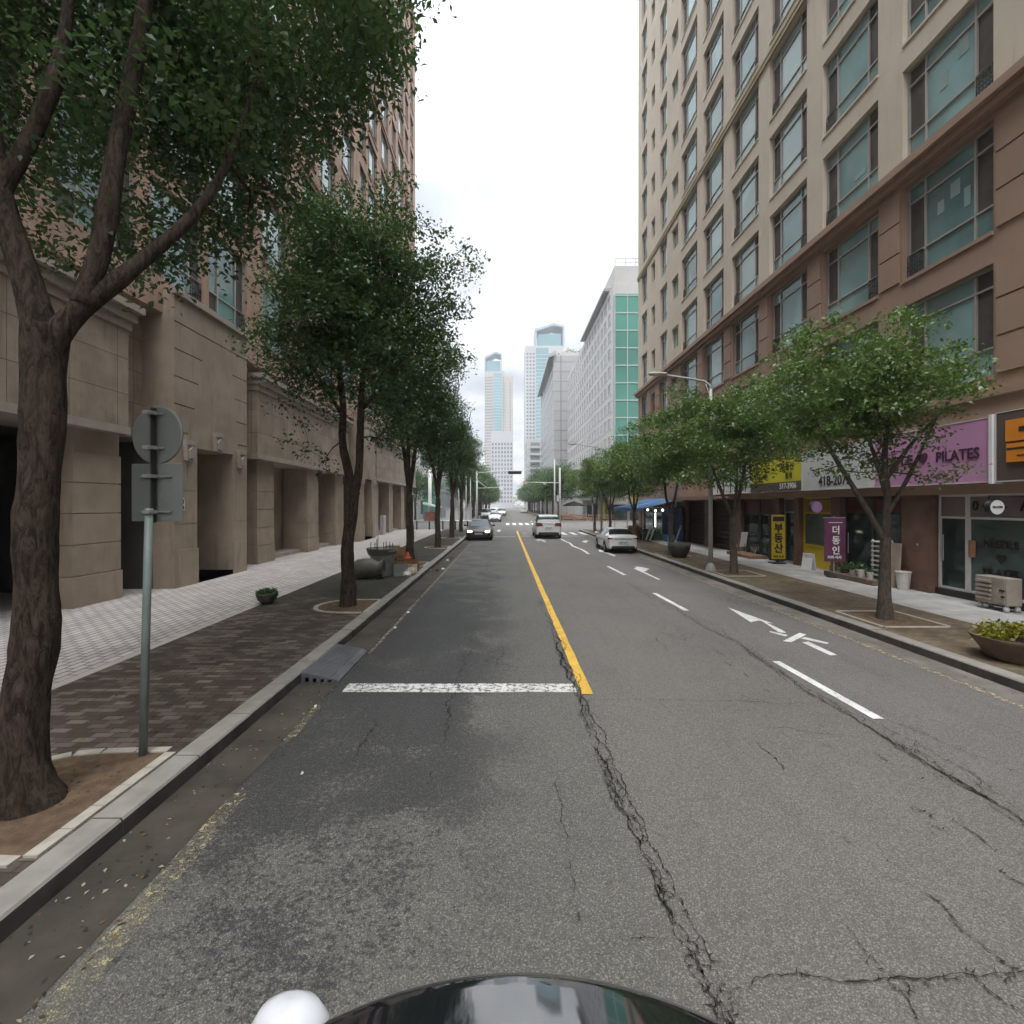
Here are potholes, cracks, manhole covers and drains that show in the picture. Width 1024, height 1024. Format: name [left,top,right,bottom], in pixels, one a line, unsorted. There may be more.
crack [396,602,803,1024]
crack [732,890,1024,1023]
